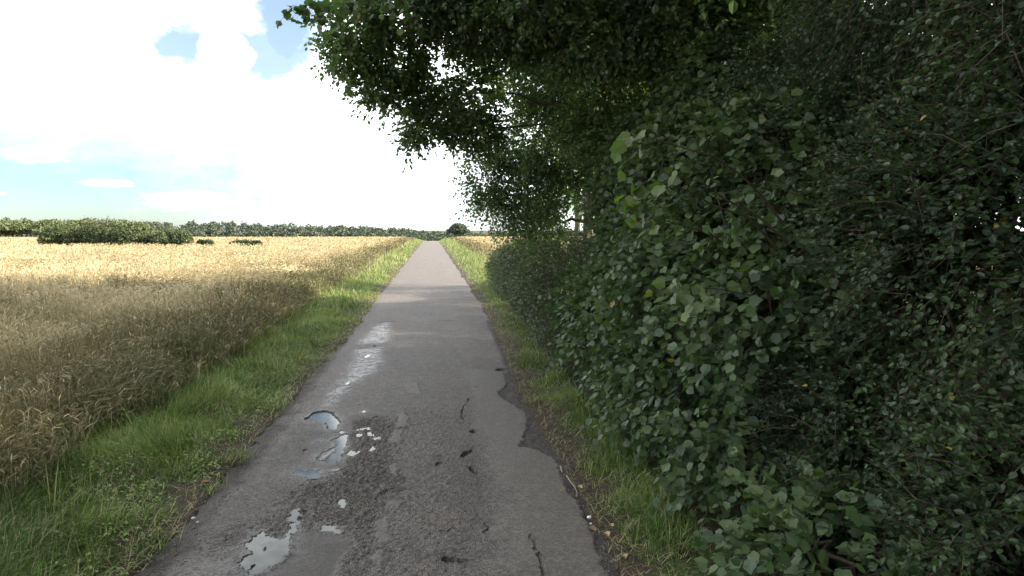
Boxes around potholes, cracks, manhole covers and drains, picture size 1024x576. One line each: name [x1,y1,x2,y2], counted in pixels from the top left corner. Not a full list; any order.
pothole [314,433,350,463]
pothole [291,469,322,480]
crack [527,533,549,576]
pothole [252,529,359,576]
pothole [237,508,302,575]
